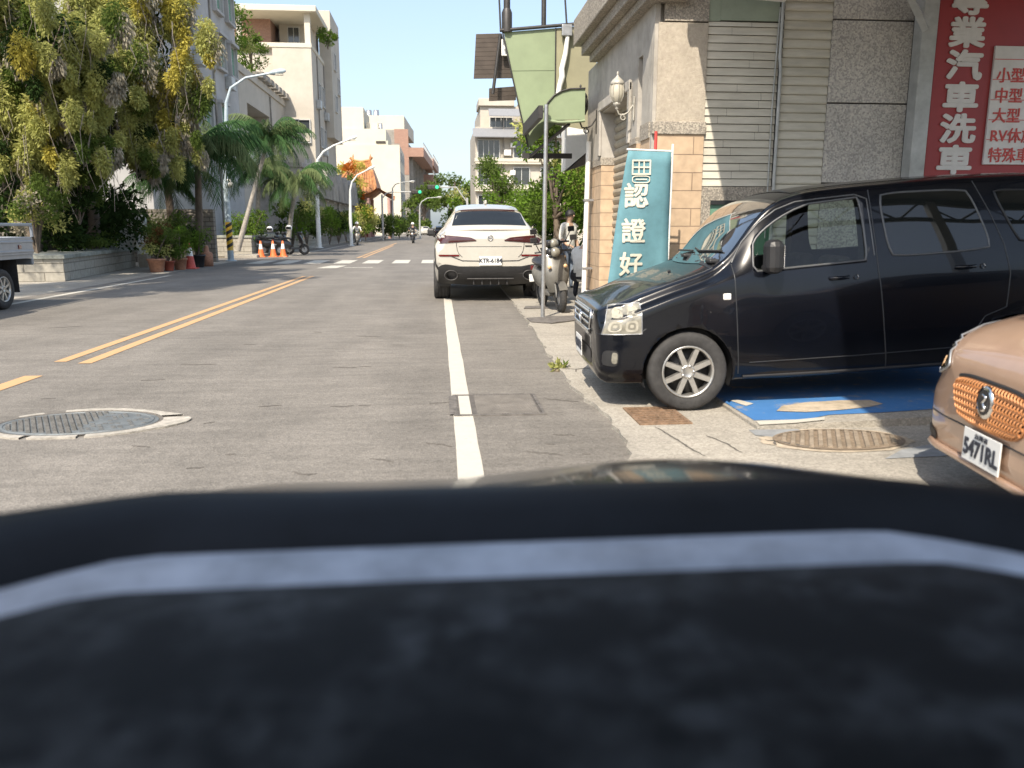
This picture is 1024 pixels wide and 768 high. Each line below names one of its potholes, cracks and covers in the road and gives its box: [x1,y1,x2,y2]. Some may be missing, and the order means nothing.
drain grate [623,406,693,425]
utility cover [449,393,546,416]
manhole cover [0,408,191,440]
manhole cover [759,429,916,452]
